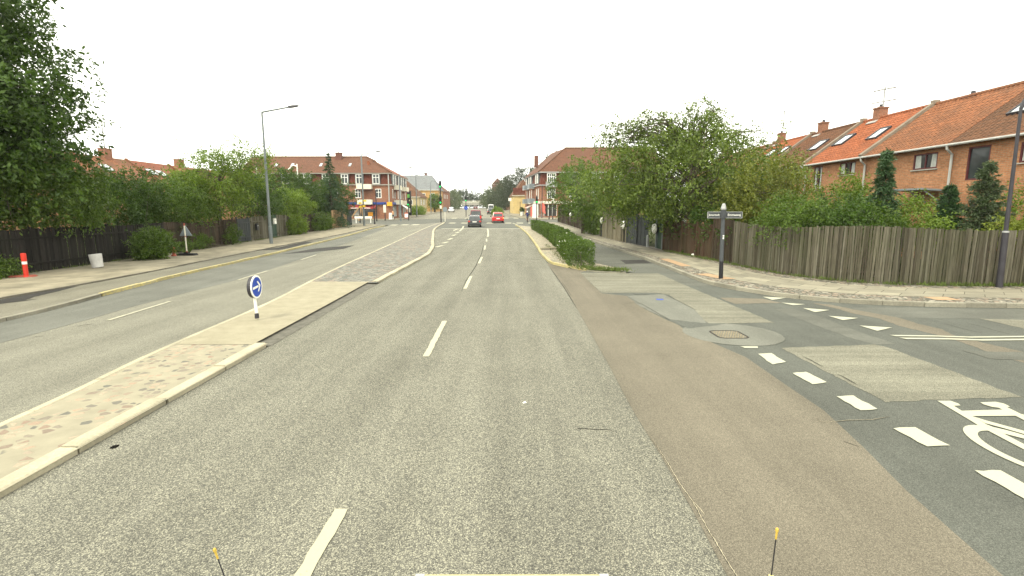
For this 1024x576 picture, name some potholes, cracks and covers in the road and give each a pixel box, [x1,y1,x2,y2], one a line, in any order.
manhole cover [709,330,749,339]
